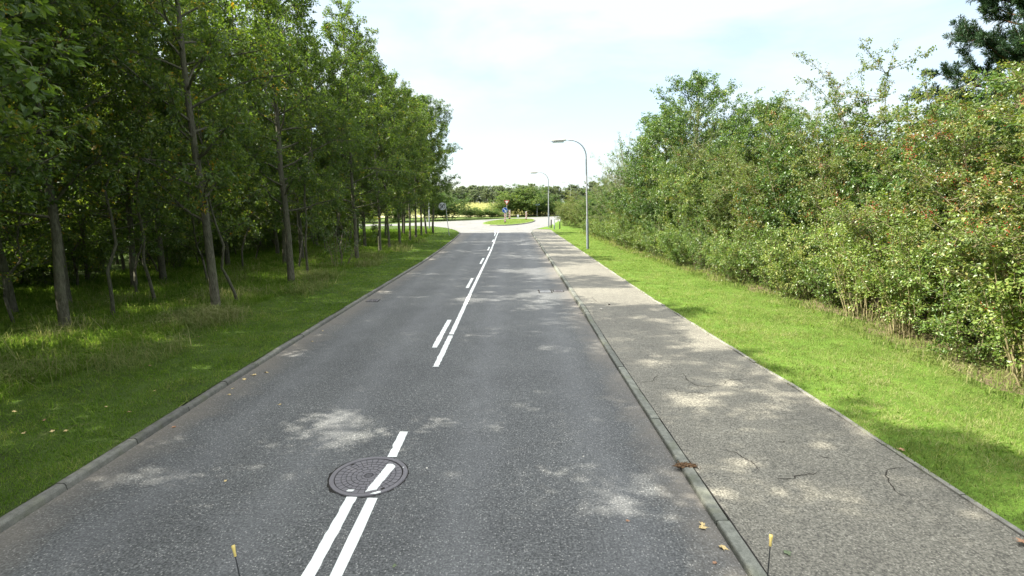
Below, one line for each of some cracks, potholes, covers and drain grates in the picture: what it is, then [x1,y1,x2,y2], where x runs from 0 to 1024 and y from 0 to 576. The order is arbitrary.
manhole cover [327,456,409,498]
